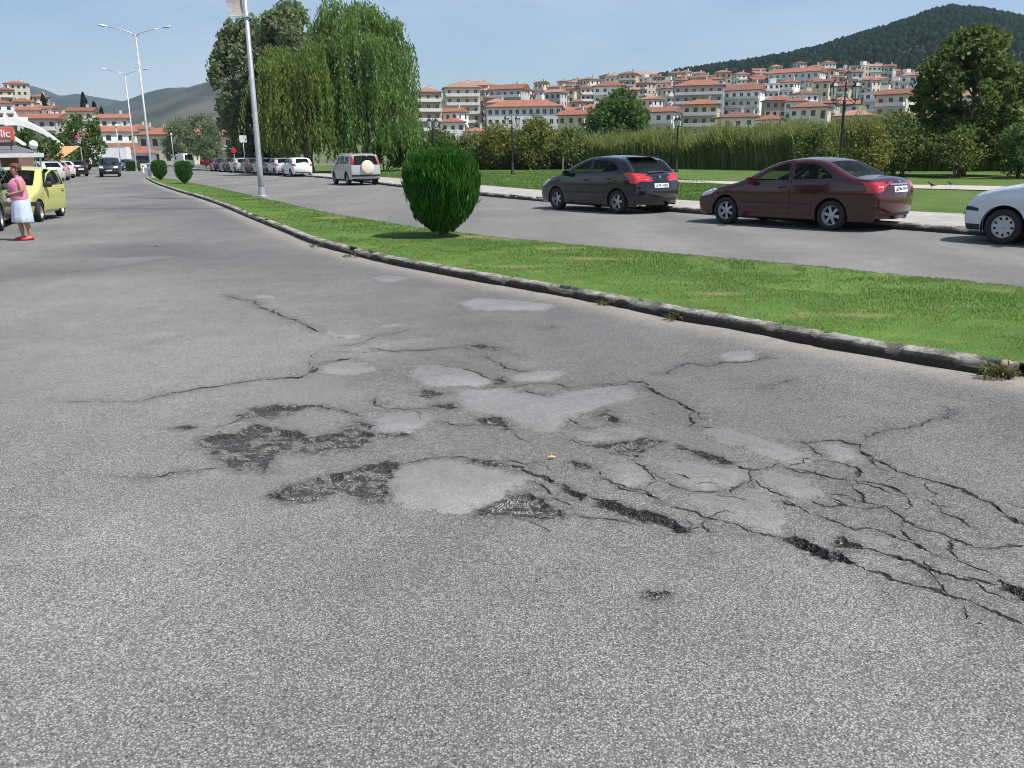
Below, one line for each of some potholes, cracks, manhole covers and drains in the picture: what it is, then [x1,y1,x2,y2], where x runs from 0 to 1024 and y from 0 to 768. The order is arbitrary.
crack [568,356,793,445]
pothole [834,536,864,550]
pothole [782,533,856,564]
pothole [266,460,399,504]
crack [597,417,1024,626]
pothole [235,404,331,420]
pothole [592,498,692,535]
pothole [475,492,566,520]
pothole [199,421,411,472]
pothole [644,590,672,600]
crack [73,353,350,402]
crack [228,296,318,332]
